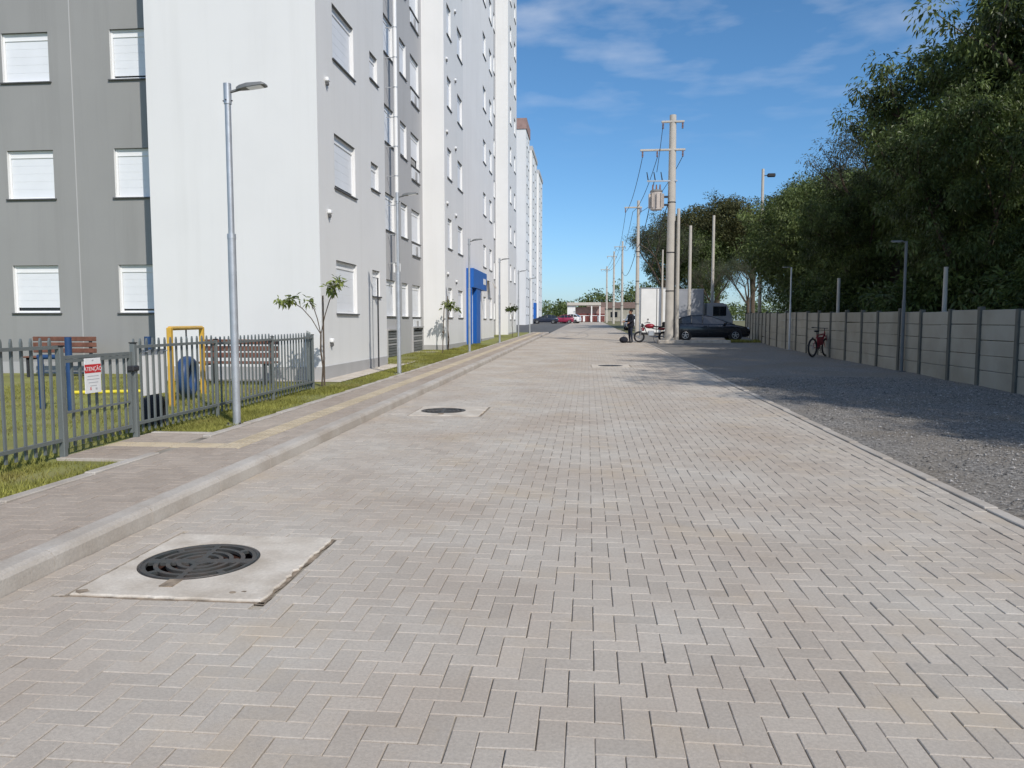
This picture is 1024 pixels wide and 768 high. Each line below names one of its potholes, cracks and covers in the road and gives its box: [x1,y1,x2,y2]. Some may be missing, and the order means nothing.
manhole cover [408,406,489,417]
manhole cover [58,534,335,605]
